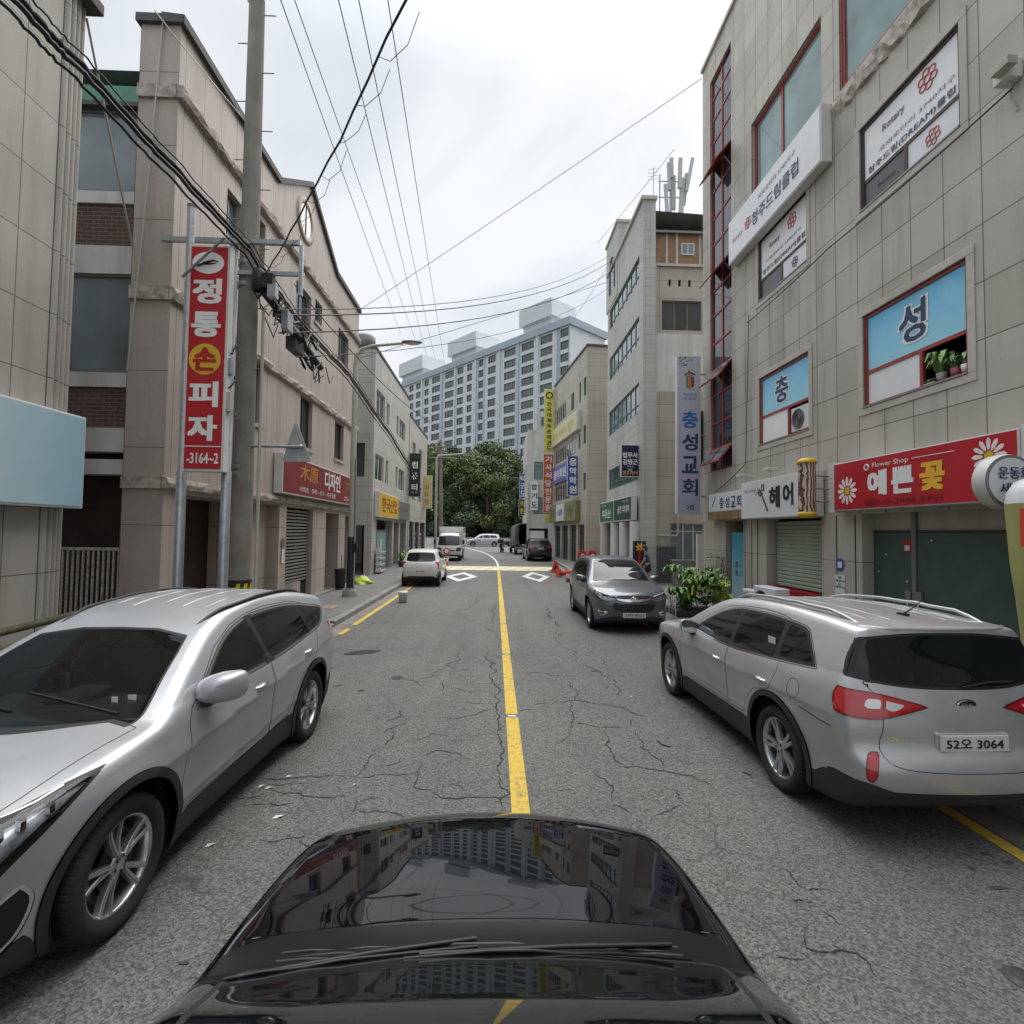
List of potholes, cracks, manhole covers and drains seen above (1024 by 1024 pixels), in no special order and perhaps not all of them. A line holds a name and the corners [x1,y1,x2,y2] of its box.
crack [236,584,511,816]
crack [518,607,712,815]
crack [775,869,874,974]
